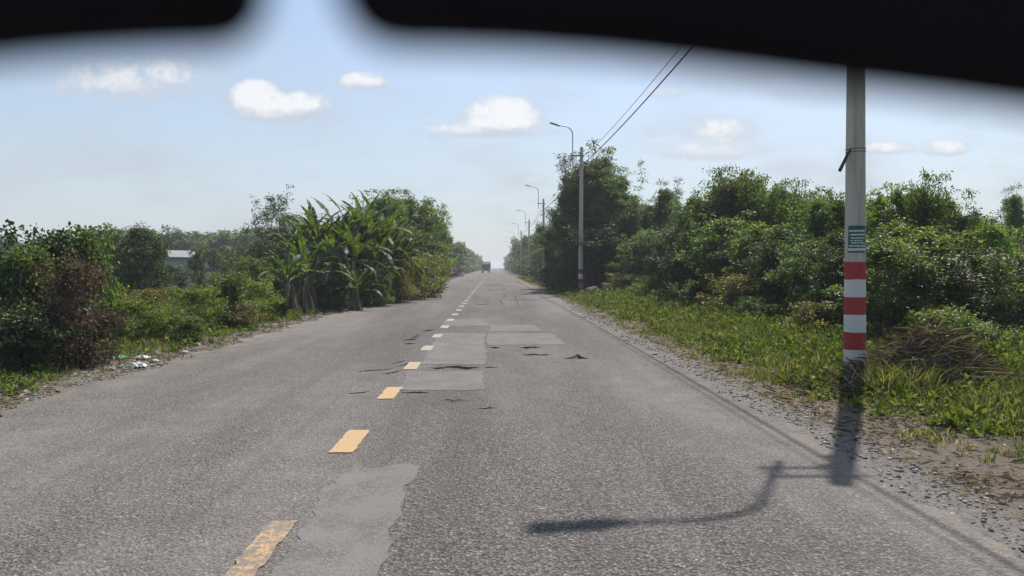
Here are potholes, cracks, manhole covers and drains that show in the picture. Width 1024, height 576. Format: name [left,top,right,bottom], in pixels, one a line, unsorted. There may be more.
crack [359,329,436,374]
